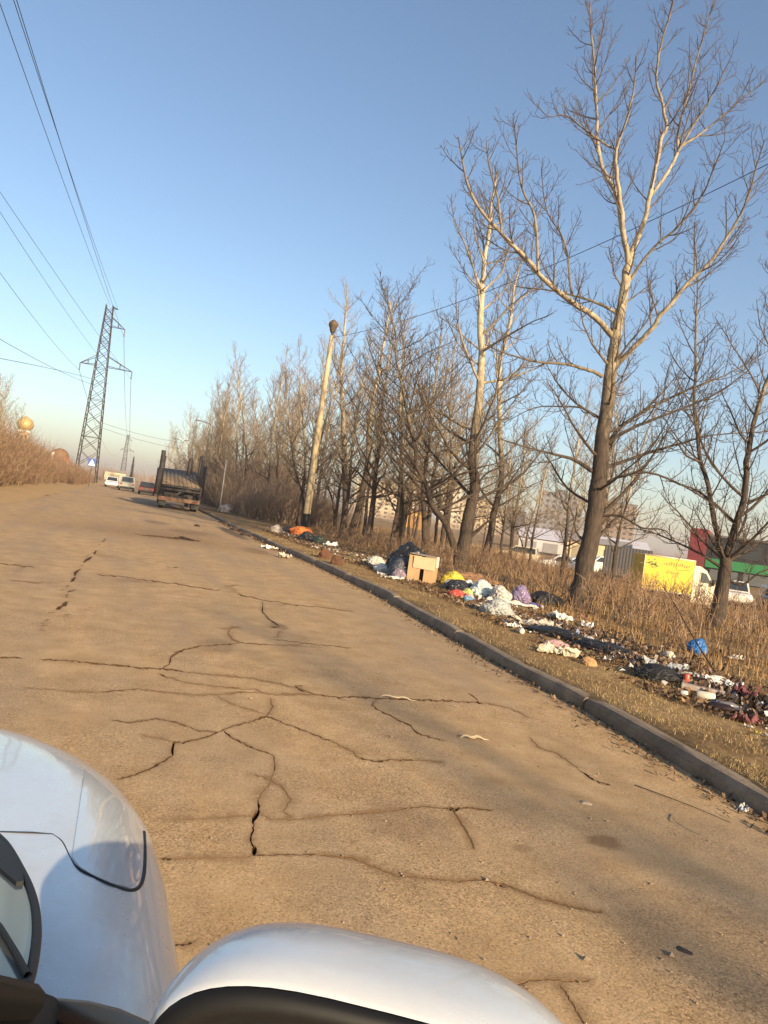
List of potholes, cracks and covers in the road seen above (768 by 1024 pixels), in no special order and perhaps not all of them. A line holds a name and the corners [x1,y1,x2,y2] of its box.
crack [517,978,590,1024]
crack [31,539,602,913]
